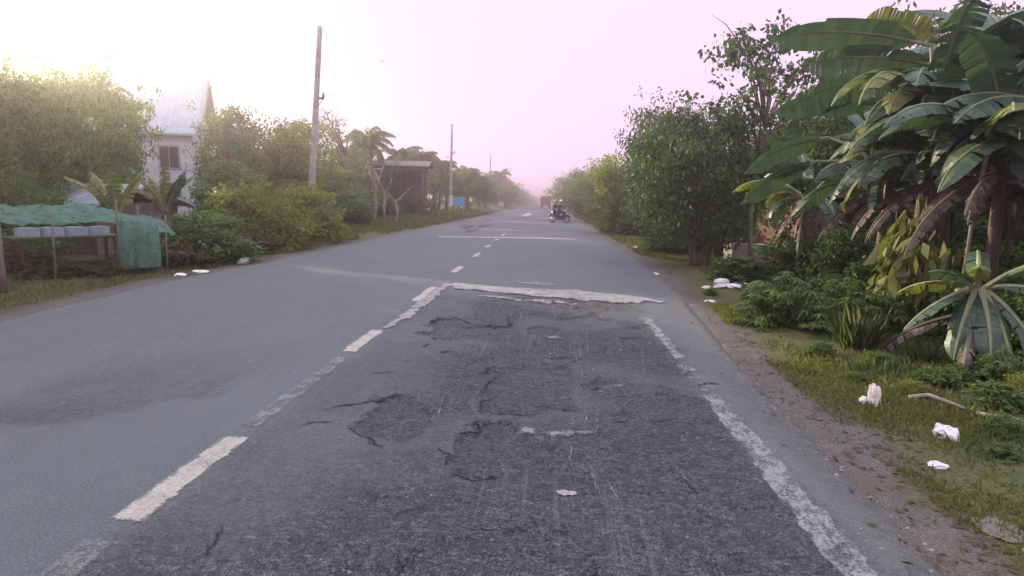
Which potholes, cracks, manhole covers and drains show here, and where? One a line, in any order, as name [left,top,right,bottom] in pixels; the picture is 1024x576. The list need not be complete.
pothole [446,419,556,480]
crack [192,525,223,563]
crack [298,393,433,426]
pothole [412,317,517,341]
pothole [346,394,435,442]
crack [437,365,571,481]
